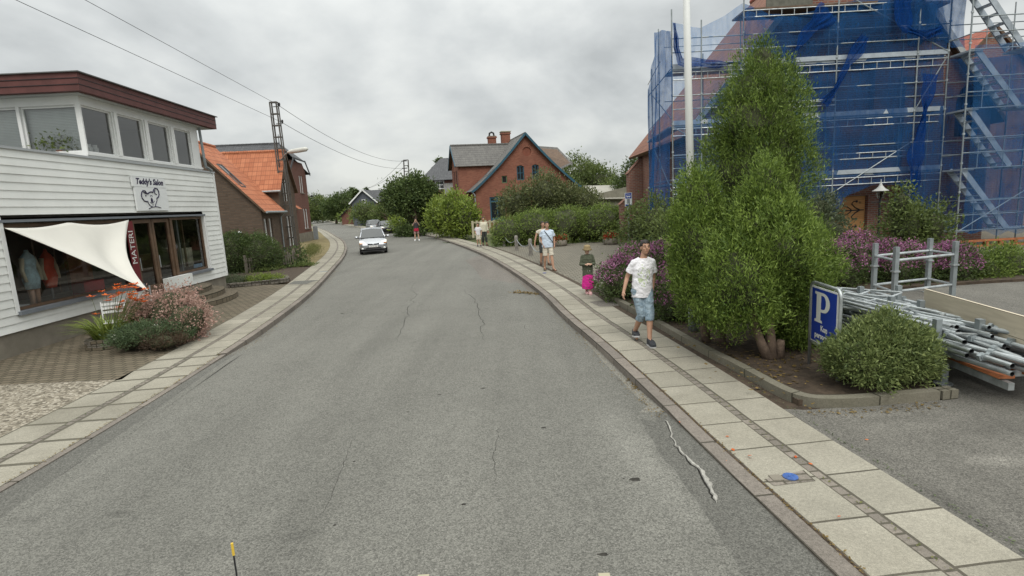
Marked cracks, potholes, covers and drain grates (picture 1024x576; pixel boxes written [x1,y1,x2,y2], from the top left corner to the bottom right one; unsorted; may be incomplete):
crack [665,420,718,503]
